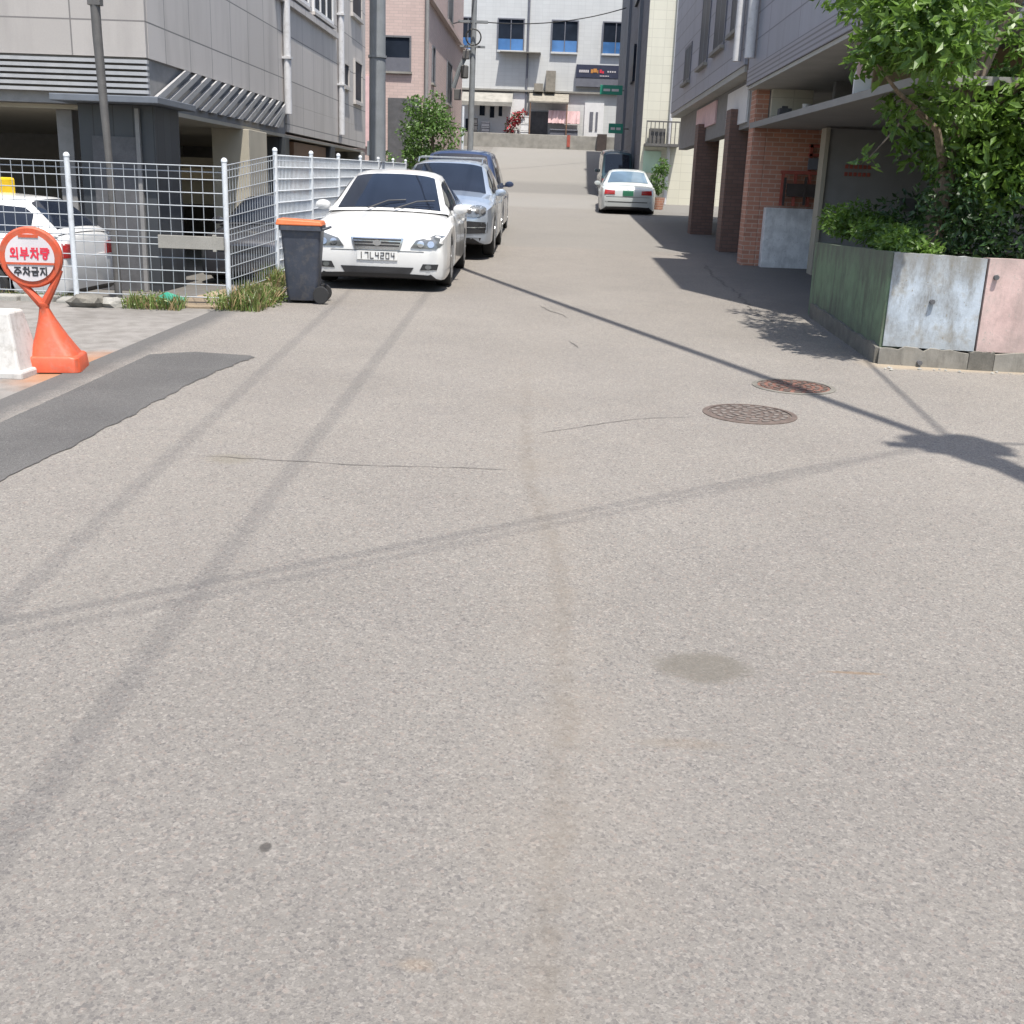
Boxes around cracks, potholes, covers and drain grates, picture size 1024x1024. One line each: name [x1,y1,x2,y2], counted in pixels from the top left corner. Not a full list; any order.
manhole cover [752,378,836,395]
manhole cover [702,404,797,425]
crack [704,265,774,323]
crack [201,455,520,471]
